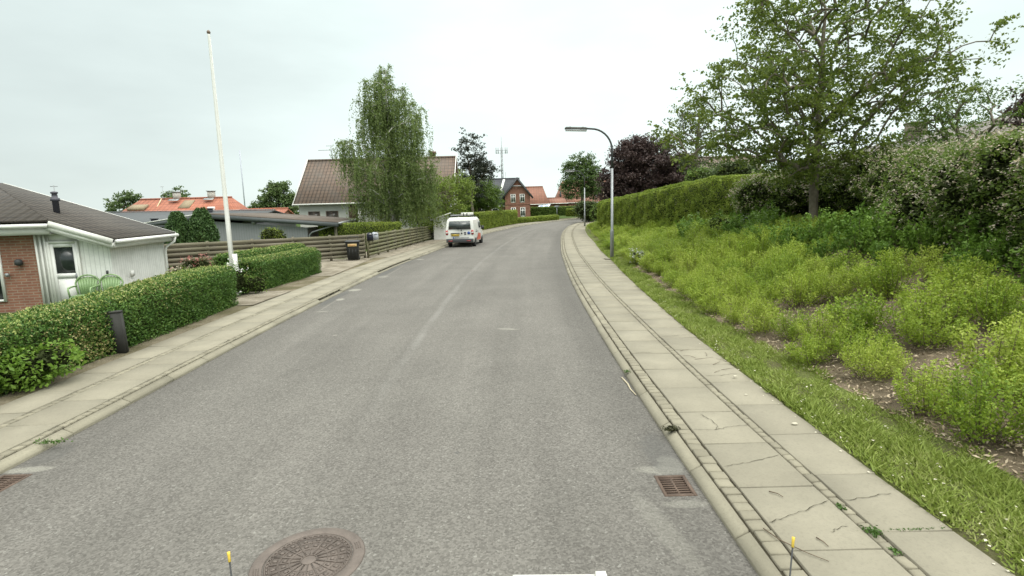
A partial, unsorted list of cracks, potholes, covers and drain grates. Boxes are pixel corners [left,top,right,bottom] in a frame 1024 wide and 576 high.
manhole cover [248,528,365,576]
drain grate [654,475,698,497]
crack [772,493,891,522]
